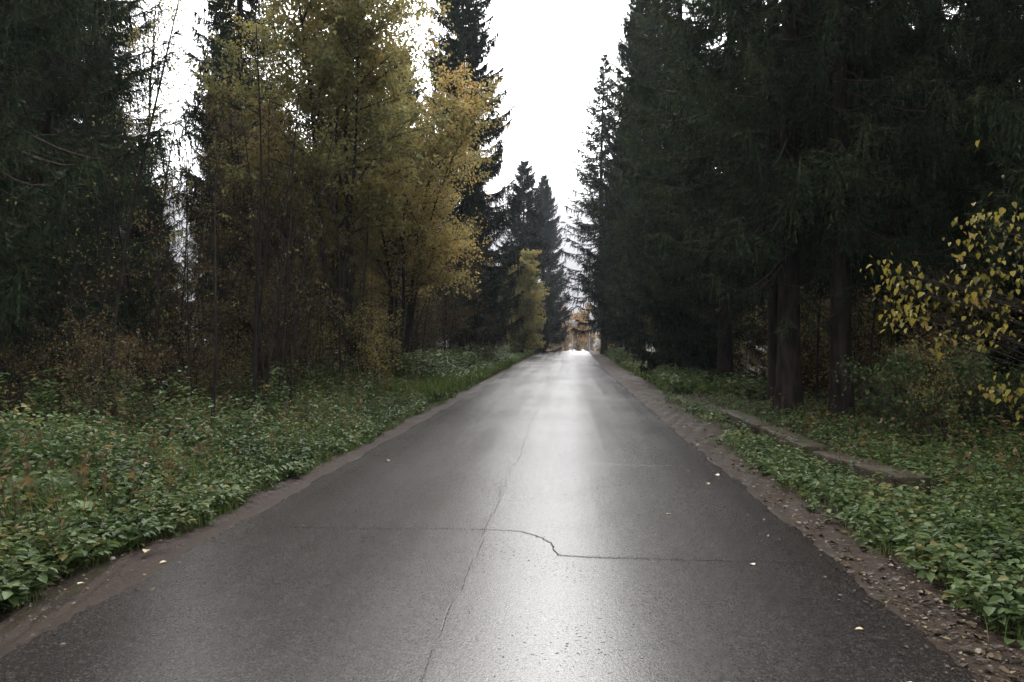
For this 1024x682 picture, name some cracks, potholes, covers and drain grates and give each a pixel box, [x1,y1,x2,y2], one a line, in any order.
crack [419,351,618,682]
